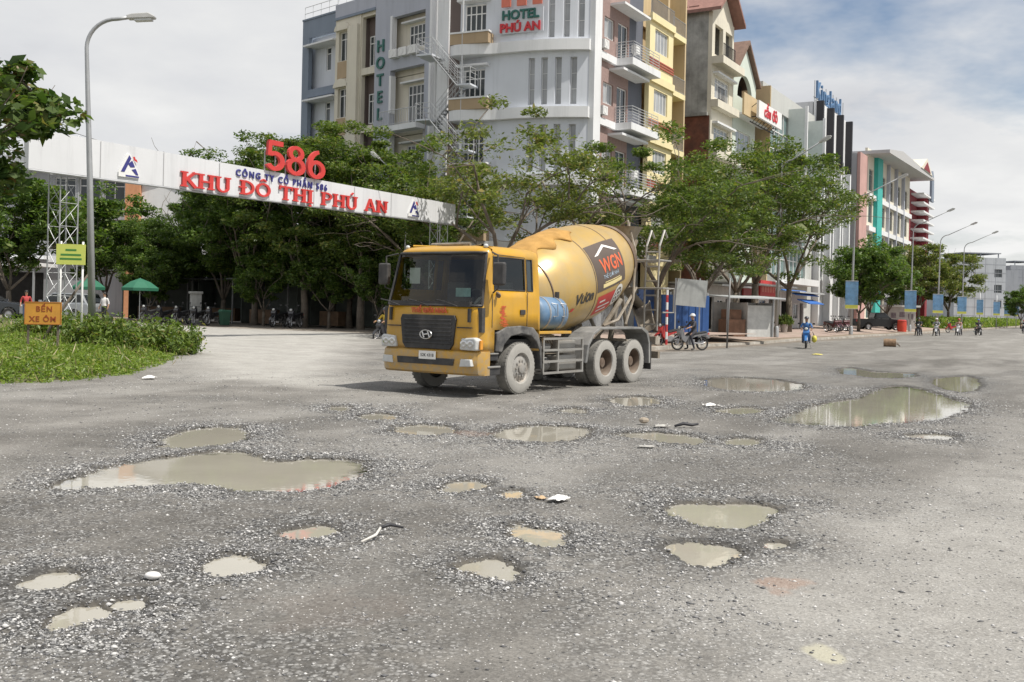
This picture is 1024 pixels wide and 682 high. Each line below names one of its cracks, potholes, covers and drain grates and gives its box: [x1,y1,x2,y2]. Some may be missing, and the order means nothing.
pothole [23,595,131,635]
pothole [21,446,386,496]
pothole [426,475,502,495]
pothole [477,422,606,444]
pothole [375,421,471,438]
pothole [0,562,110,595]
pothole [922,375,993,393]
pothole [636,533,769,571]
pothole [647,495,806,534]
pothole [830,367,925,379]
pothole [695,376,814,392]
pothole [761,384,984,428]
